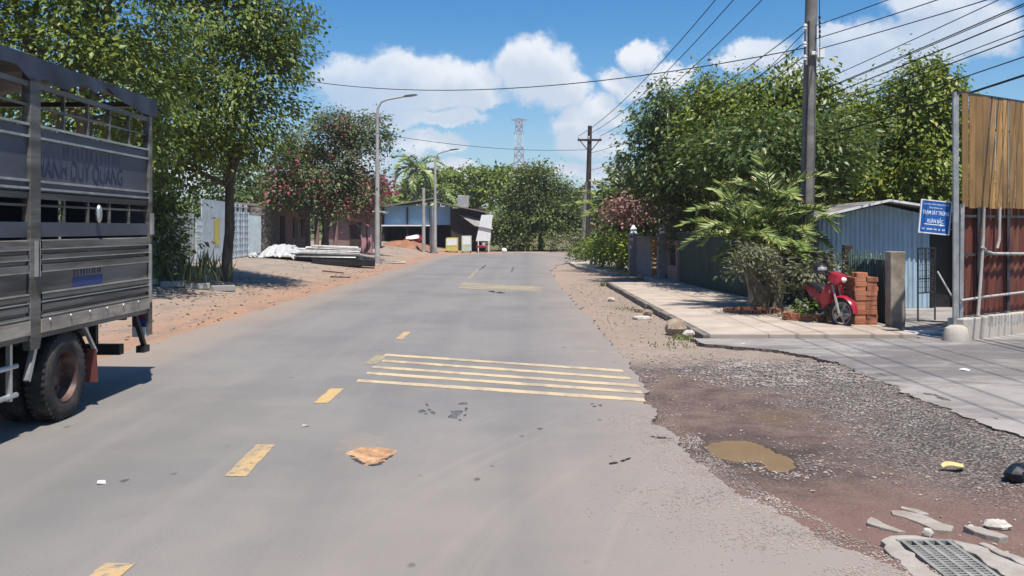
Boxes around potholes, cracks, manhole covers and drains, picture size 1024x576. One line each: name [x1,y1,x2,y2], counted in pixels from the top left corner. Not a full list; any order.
pothole [699,438,800,473]
drain grate [881,535,1024,576]
pothole [448,402,468,421]
